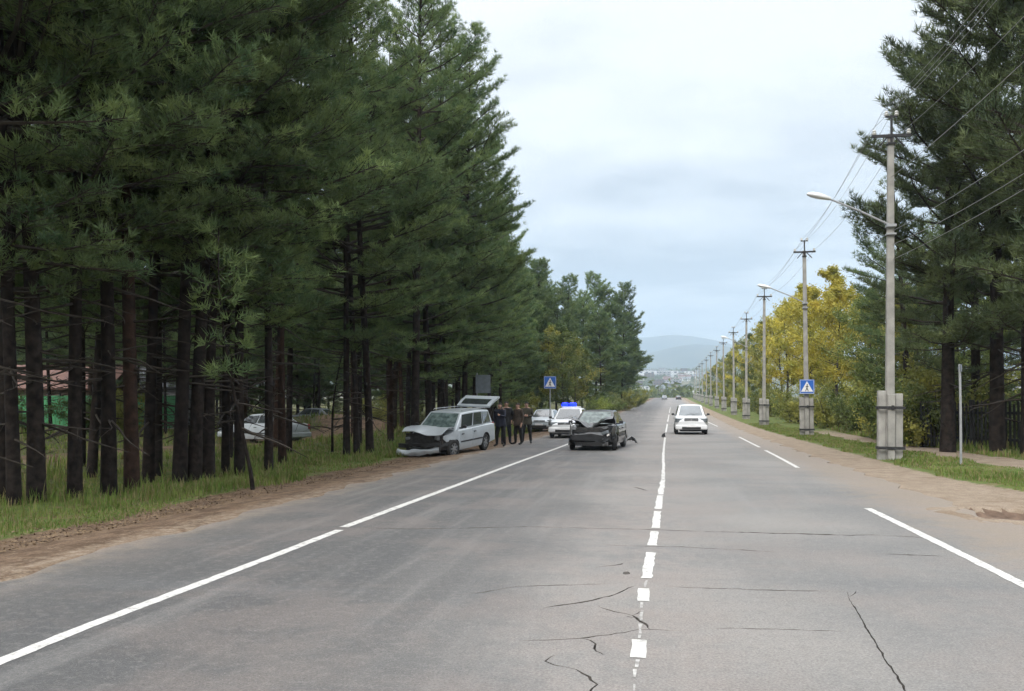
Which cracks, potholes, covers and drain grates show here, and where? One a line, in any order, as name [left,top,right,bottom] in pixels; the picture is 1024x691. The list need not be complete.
crack [481,584,654,691]
